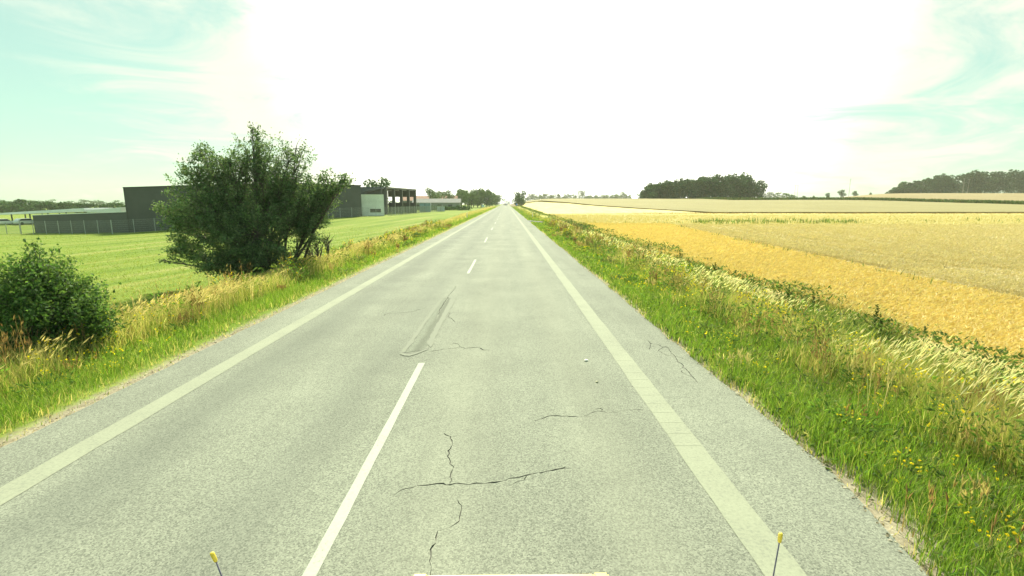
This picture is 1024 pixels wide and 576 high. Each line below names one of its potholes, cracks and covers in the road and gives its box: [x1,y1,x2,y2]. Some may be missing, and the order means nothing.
crack [396,433,565,575]
